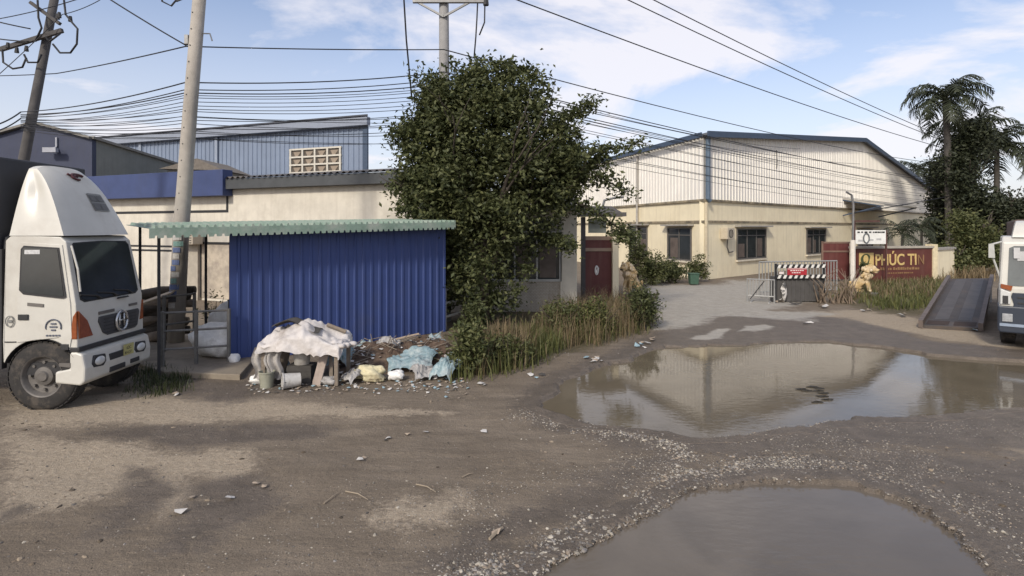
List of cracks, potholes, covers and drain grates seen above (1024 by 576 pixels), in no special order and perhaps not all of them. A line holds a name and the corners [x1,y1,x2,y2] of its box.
pothole [521,338,1024,444]
pothole [497,467,1024,576]
